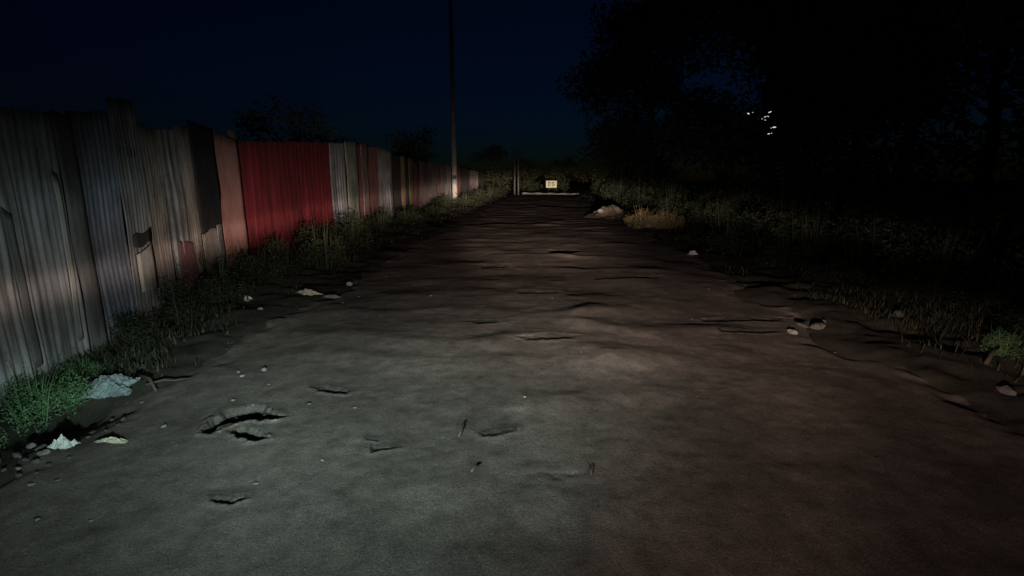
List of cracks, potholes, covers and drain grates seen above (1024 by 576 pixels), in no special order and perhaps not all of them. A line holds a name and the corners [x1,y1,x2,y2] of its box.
pothole [196,489,258,511]
pothole [190,400,297,439]
pothole [215,420,278,446]
pothole [301,380,358,398]
pothole [470,423,525,442]
pothole [361,439,412,458]
